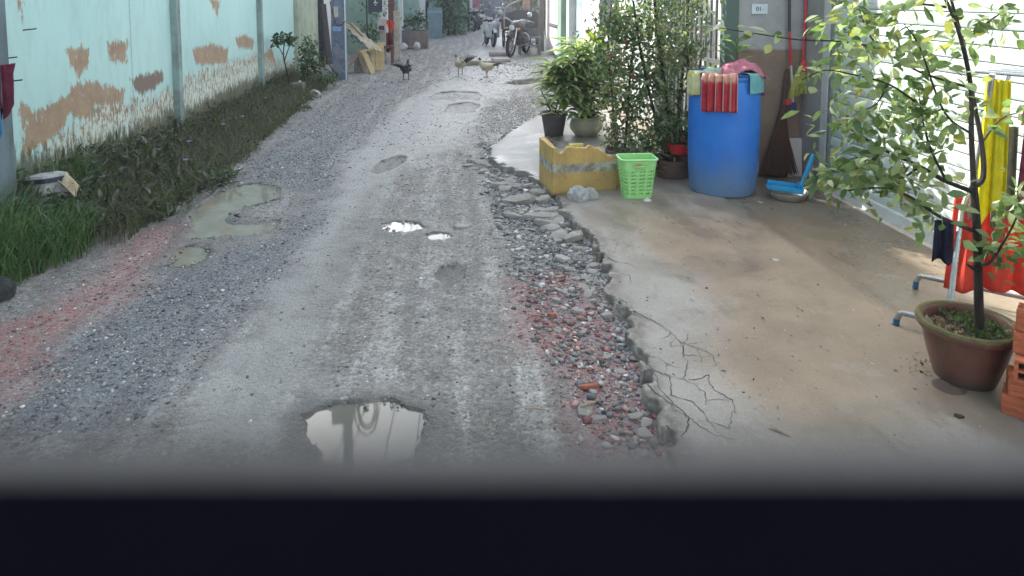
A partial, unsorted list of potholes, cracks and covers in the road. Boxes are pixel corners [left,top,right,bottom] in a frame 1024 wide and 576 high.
pothole [364,153,414,178]
pothole [275,384,455,435]
pothole [169,179,289,249]
pothole [366,216,438,240]
pothole [416,257,481,293]
pothole [438,101,485,115]
crack [615,298,735,435]
